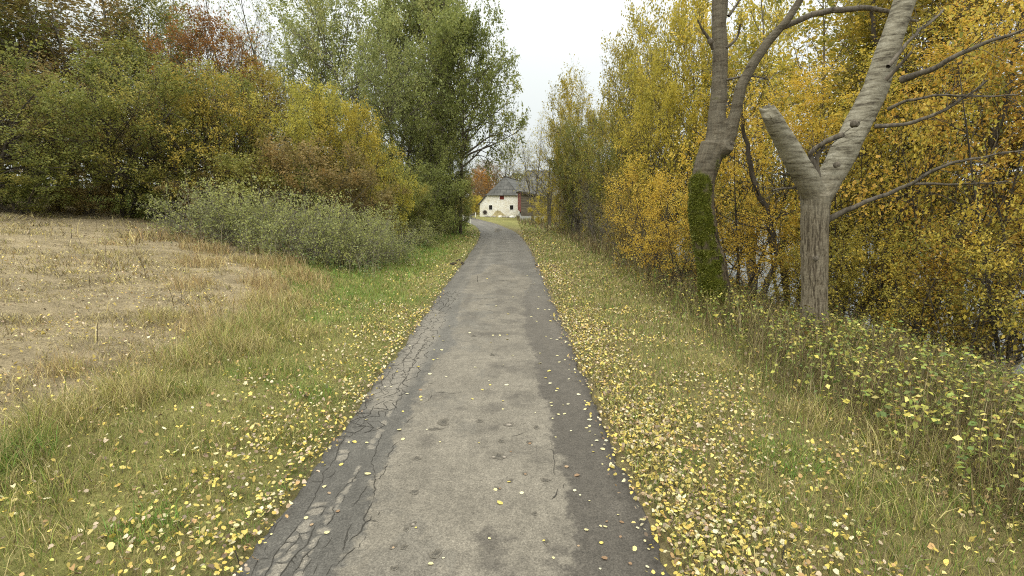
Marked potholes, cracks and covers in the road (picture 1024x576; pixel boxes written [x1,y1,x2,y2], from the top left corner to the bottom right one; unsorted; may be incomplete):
crack [251,291,460,576]
